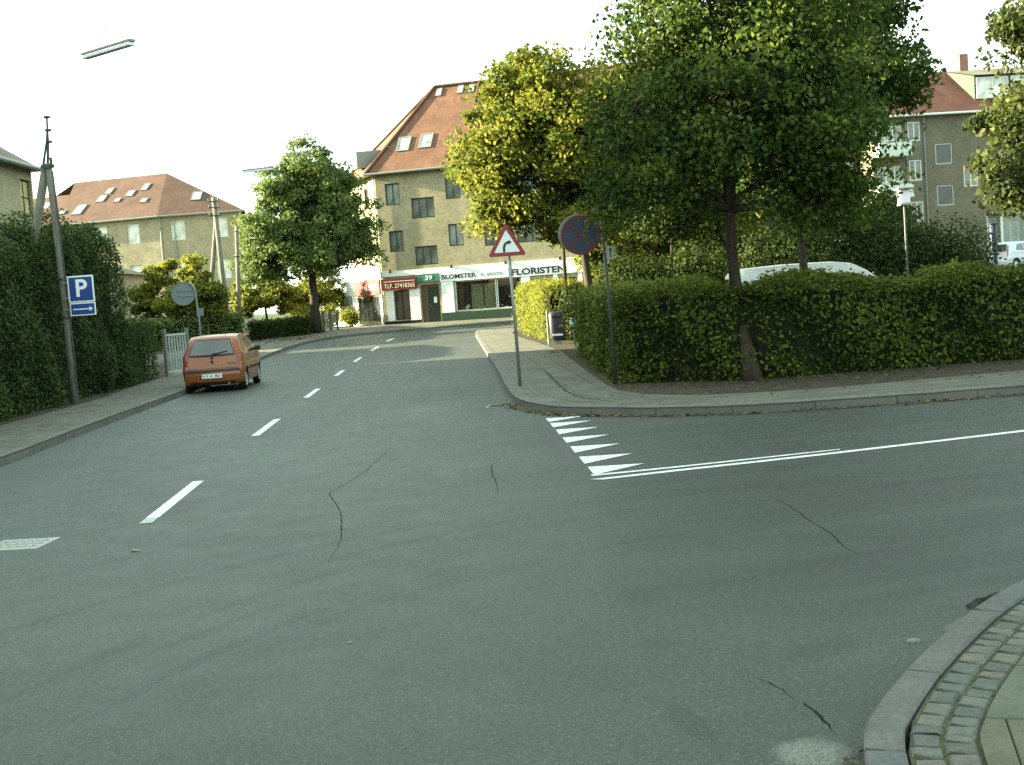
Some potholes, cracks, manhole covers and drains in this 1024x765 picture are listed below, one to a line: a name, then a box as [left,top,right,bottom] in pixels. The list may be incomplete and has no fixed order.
crack [769,495,858,555]
crack [755,677,836,735]
crack [329,448,390,560]
